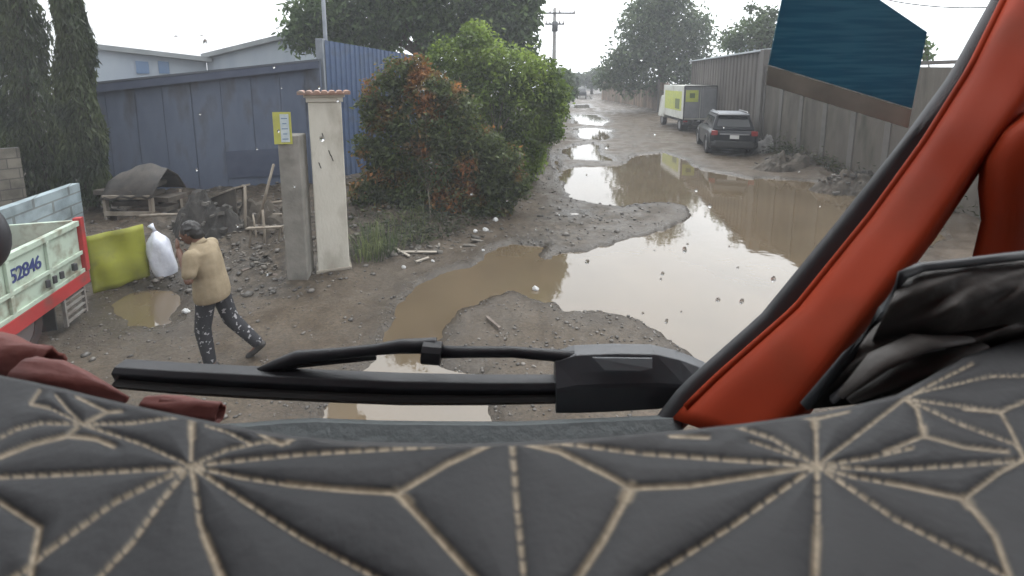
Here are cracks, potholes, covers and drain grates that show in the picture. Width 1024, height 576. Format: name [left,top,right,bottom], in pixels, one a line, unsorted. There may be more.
pothole [540,150,960,363]
pothole [569,126,617,142]
pothole [299,235,557,421]
pothole [566,113,616,126]
pothole [555,141,622,162]
